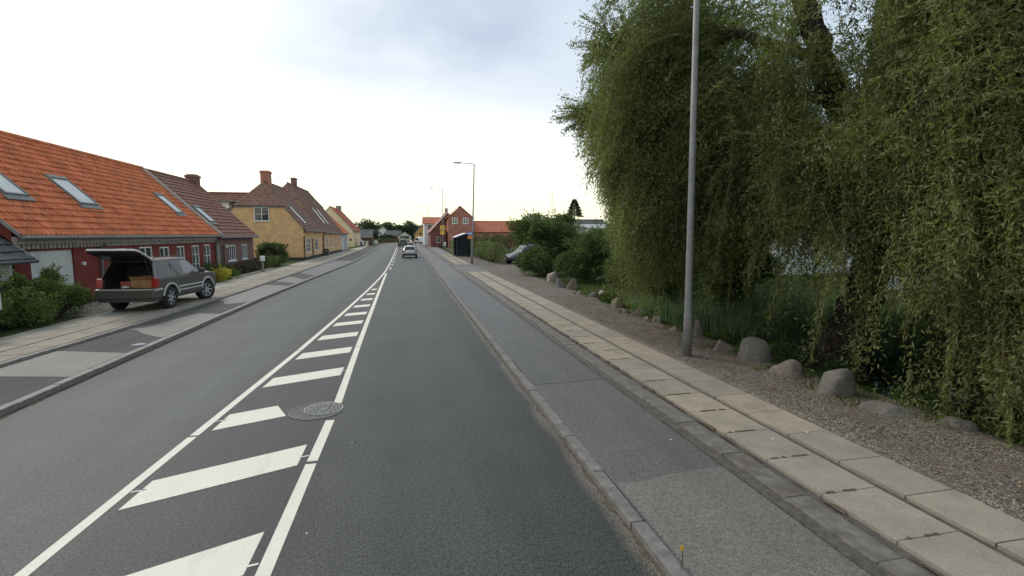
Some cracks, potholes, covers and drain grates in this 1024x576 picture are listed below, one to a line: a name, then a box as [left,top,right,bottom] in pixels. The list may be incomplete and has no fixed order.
manhole cover [288,401,344,420]
